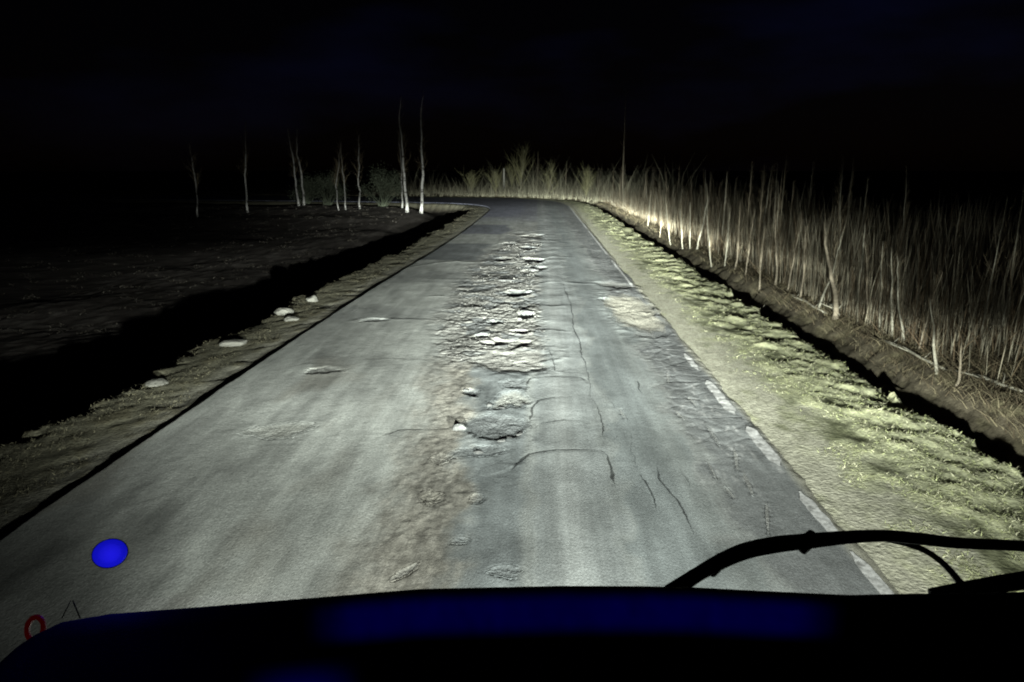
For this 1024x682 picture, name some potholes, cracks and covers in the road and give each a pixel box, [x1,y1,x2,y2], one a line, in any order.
pothole [487,389,532,410]
pothole [469,348,557,375]
pothole [485,564,525,580]
pothole [498,289,533,297]
pothole [475,338,535,351]
pothole [469,492,485,504]
crack [498,281,694,534]
pothole [457,411,537,442]
pothole [303,366,349,375]
pothole [449,536,470,545]
pothole [388,562,421,582]
pothole [519,266,548,275]
